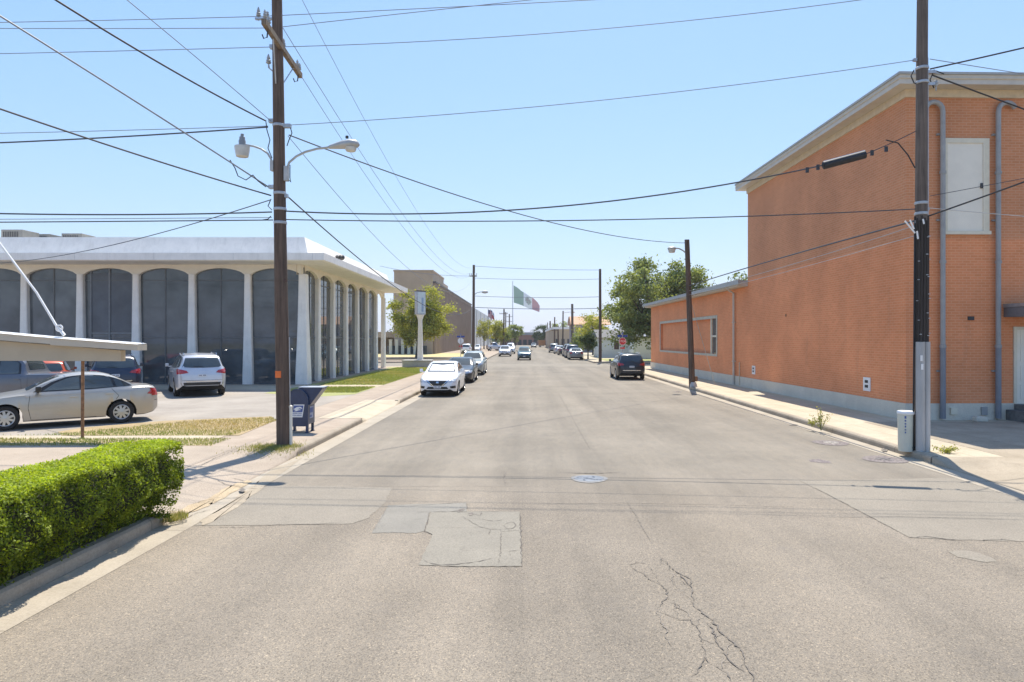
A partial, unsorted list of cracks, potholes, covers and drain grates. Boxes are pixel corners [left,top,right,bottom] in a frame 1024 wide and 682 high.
crack [631,557,754,682]
manhole cover [862,455,909,463]
manhole cover [571,475,608,483]
